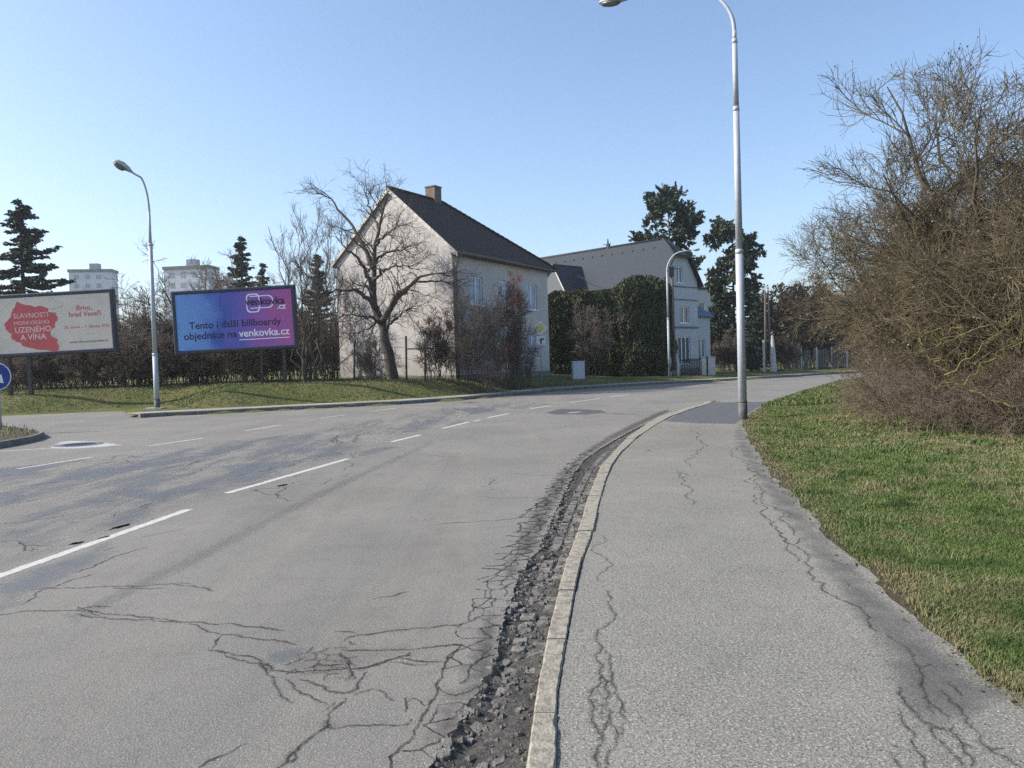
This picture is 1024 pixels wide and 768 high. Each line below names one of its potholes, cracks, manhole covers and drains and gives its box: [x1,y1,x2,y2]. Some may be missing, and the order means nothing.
crack [589,536,626,768]
pothole [433,425,644,768]
crack [2,450,592,768]
crack [730,450,875,630]
crack [890,637,1020,768]
